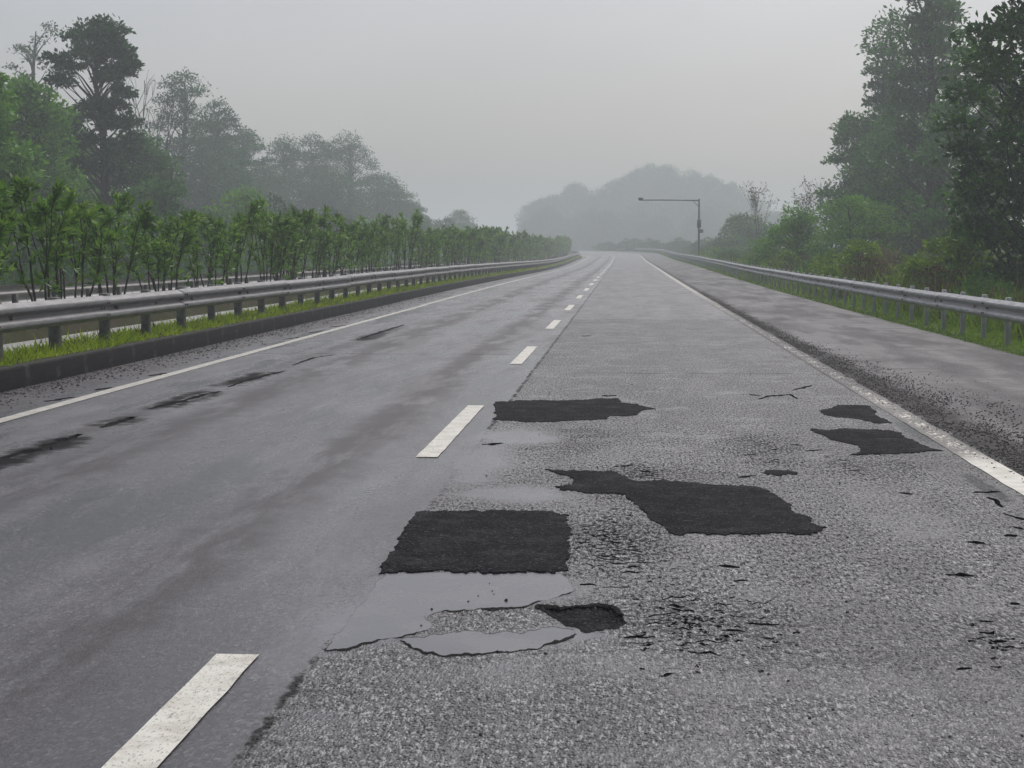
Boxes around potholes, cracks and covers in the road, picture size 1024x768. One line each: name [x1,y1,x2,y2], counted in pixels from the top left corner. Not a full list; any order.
crack [749,385,813,399]
crack [972,491,1024,537]
crack [574,508,667,588]
crack [968,623,1024,668]
